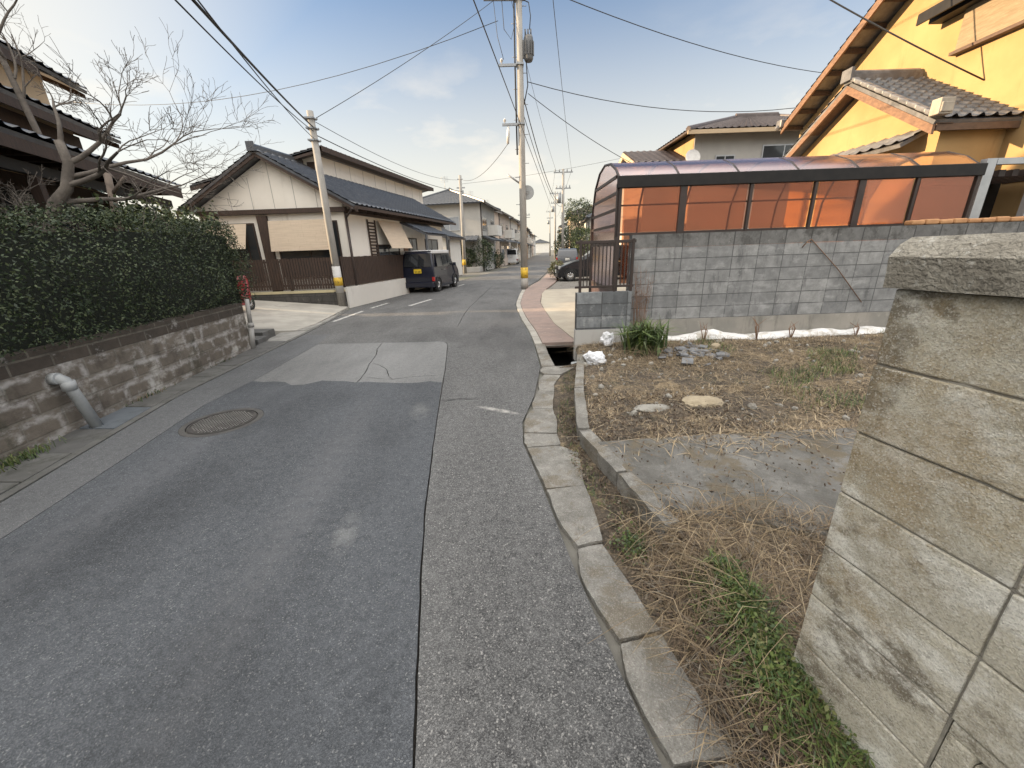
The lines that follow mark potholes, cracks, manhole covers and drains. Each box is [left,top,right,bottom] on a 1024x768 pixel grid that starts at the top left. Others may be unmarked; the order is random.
manhole cover [178,408,264,437]
drain grate [546,345,577,366]
